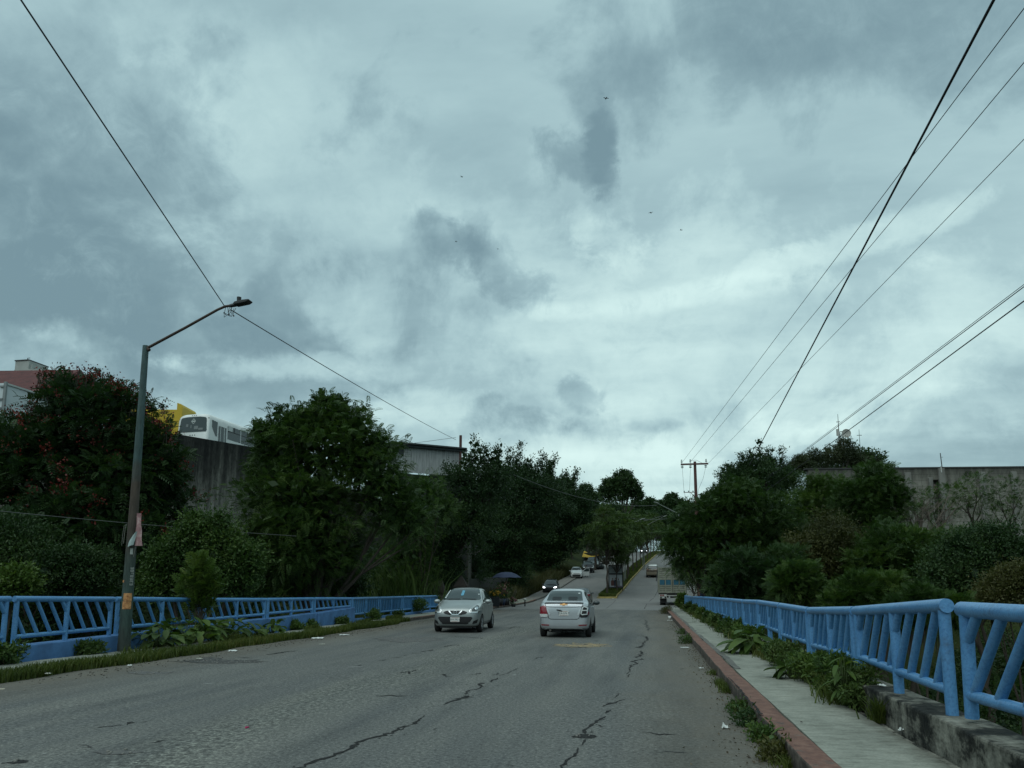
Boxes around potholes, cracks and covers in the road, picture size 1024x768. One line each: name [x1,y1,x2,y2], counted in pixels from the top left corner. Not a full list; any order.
crack [559,585,658,768]
crack [293,716,436,768]
crack [443,668,517,704]
